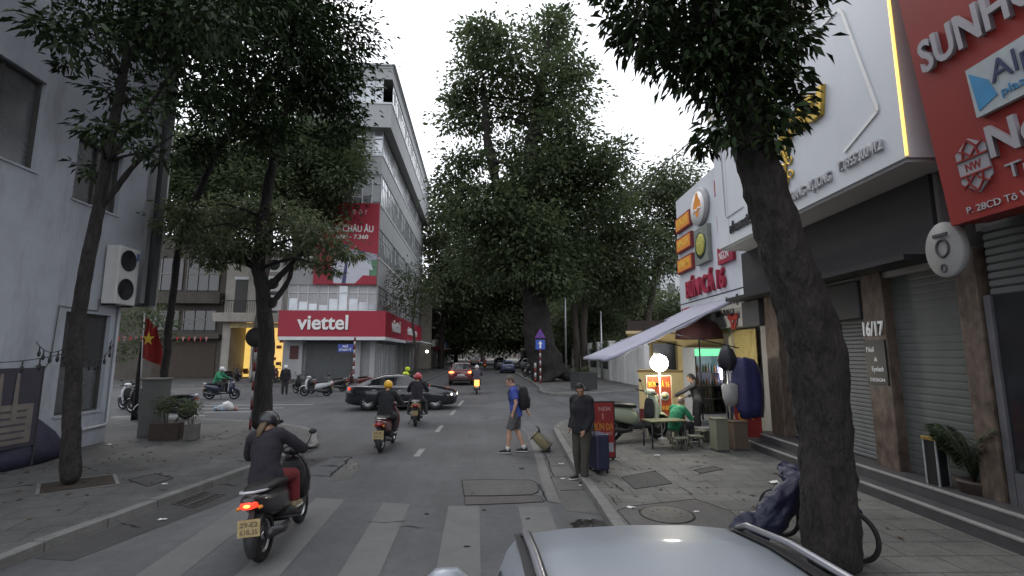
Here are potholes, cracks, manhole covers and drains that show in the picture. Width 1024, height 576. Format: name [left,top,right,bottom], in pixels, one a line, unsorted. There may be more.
pothole [569,518,607,528]
drain grate [183,493,225,508]
manhole cover [621,471,672,489]
drain grate [172,491,213,506]
manhole cover [129,473,173,487]
